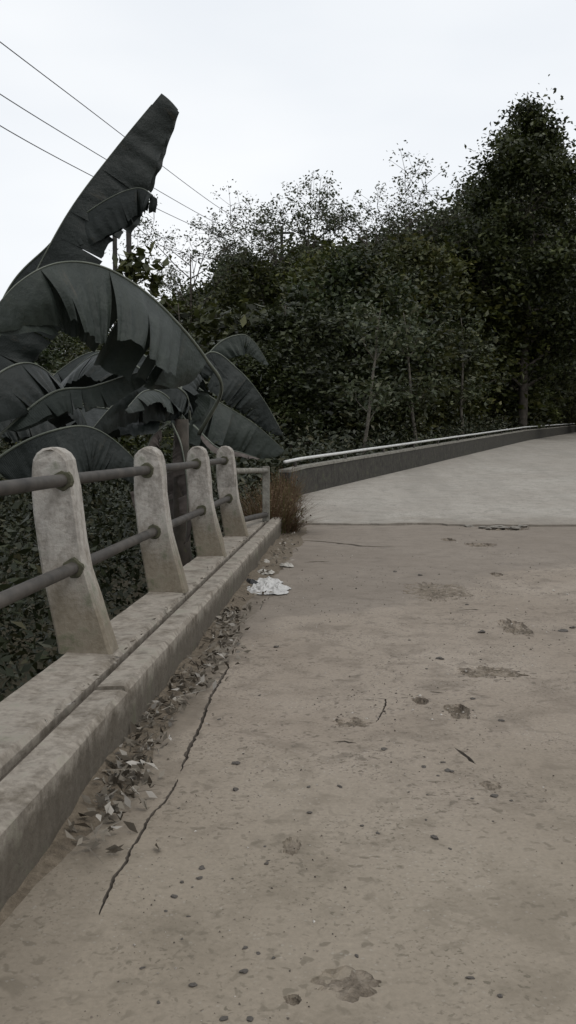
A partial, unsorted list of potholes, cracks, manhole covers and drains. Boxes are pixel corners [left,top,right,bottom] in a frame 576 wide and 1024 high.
pothole [443,704,471,719]
pothole [402,582,474,603]
pothole [310,965,382,1003]
pothole [455,665,529,679]
pothole [497,618,534,637]
crack [99,667,230,915]
